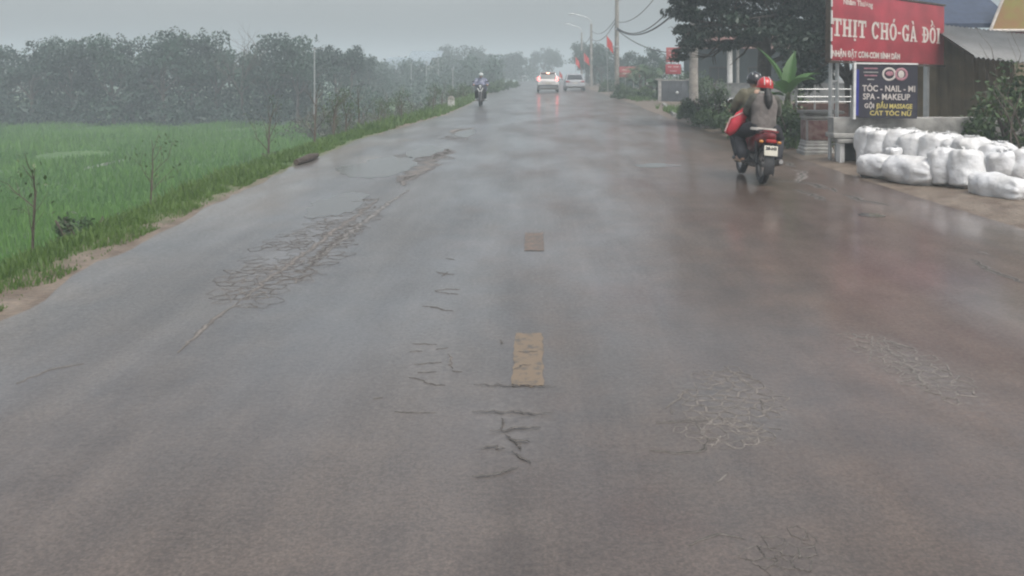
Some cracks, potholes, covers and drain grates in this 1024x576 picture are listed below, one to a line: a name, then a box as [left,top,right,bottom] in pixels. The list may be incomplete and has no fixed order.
crack [374,339,549,477]
crack [423,258,460,311]
crack [16,363,84,384]
crack [971,251,1024,283]
crack [688,473,818,576]
